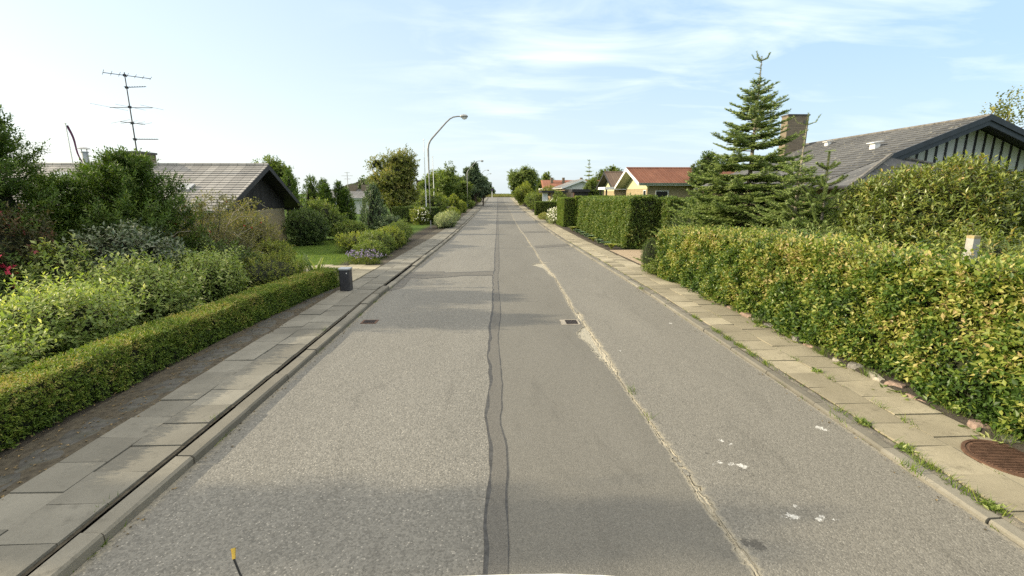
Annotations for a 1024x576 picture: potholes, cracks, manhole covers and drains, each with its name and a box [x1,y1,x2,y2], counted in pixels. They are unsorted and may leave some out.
crack [510,212,760,576]
manhole cover [961,439,1024,478]
